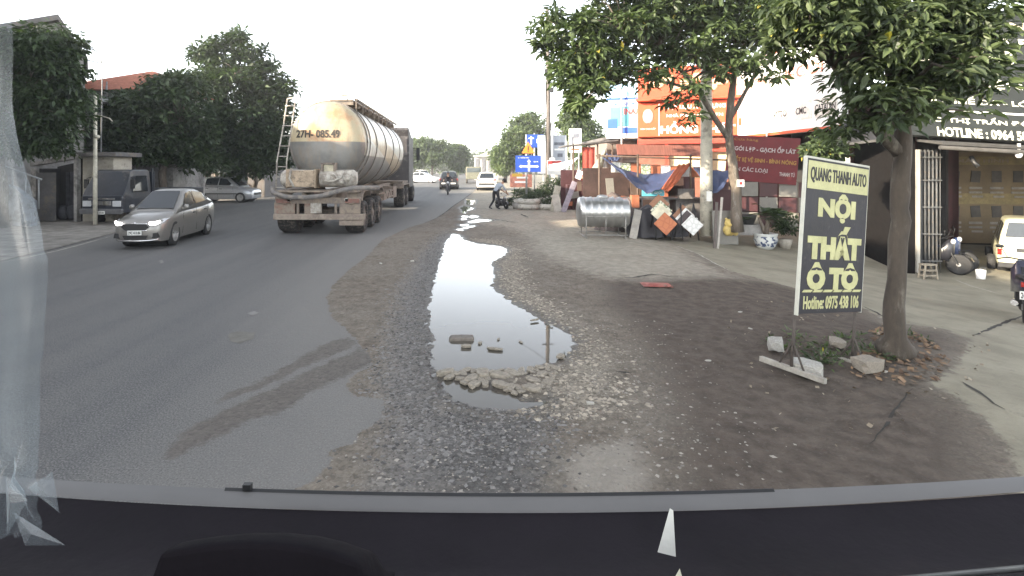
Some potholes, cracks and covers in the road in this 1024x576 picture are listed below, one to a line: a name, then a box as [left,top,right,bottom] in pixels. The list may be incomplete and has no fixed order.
pothole [409,232,597,423]
crack [869,388,913,444]
crack [963,382,1004,409]
crack [974,315,1022,335]
